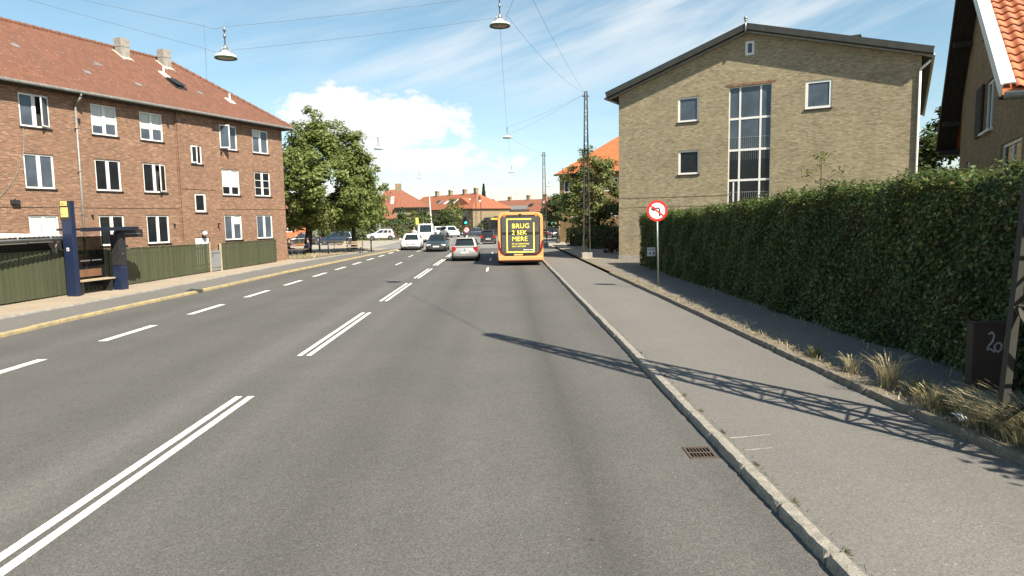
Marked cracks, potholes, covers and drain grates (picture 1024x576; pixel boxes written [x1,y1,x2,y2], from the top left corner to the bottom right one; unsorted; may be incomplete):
drain grate [682,446,719,459]
